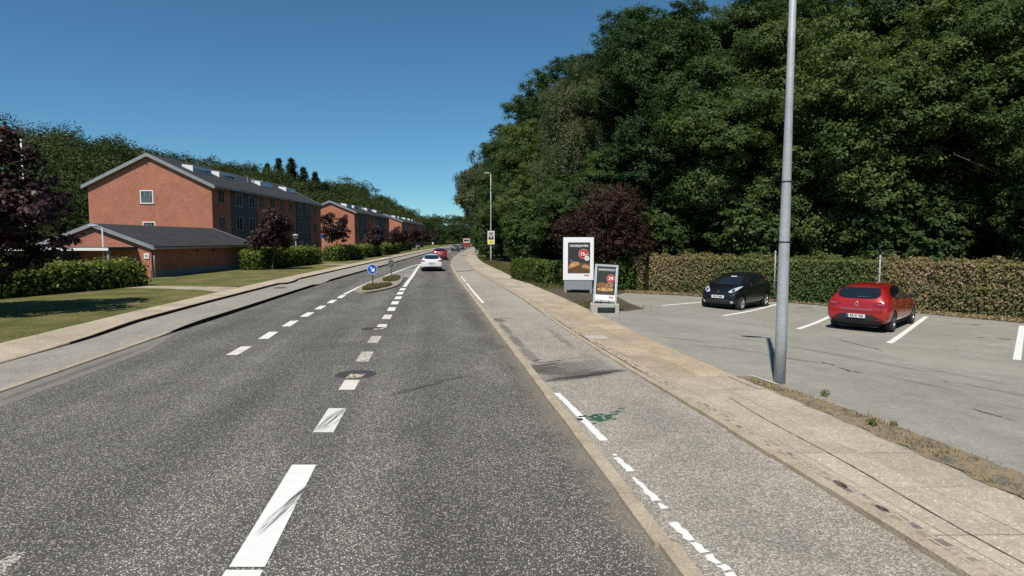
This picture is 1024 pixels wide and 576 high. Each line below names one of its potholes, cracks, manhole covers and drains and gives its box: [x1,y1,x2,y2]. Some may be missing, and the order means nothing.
manhole cover [335,370,376,379]
